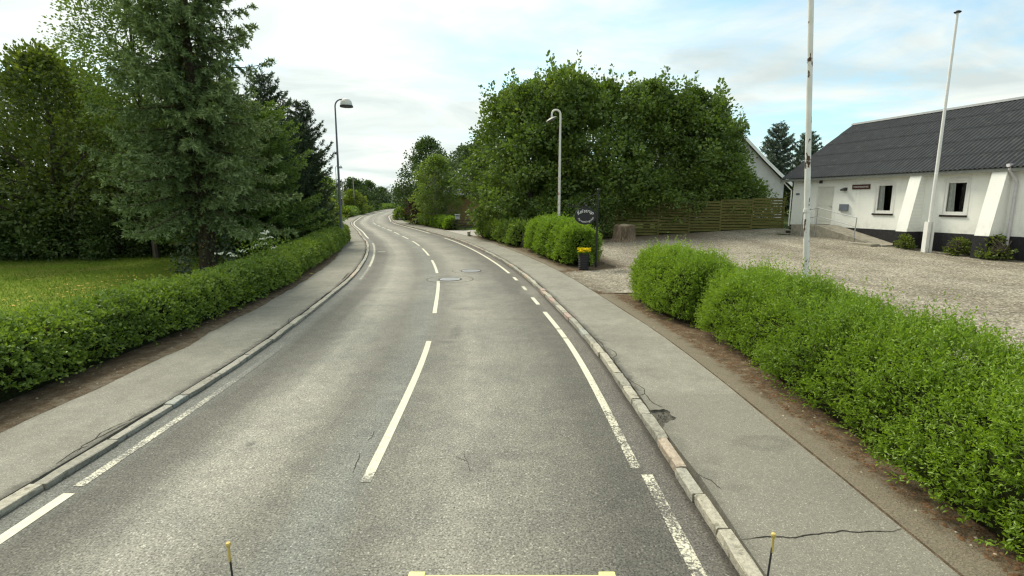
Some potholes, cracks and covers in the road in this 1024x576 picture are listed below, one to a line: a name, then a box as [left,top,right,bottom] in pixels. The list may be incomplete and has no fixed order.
crack [747,529,899,539]
pothole [649,409,676,427]
crack [598,340,664,409]
